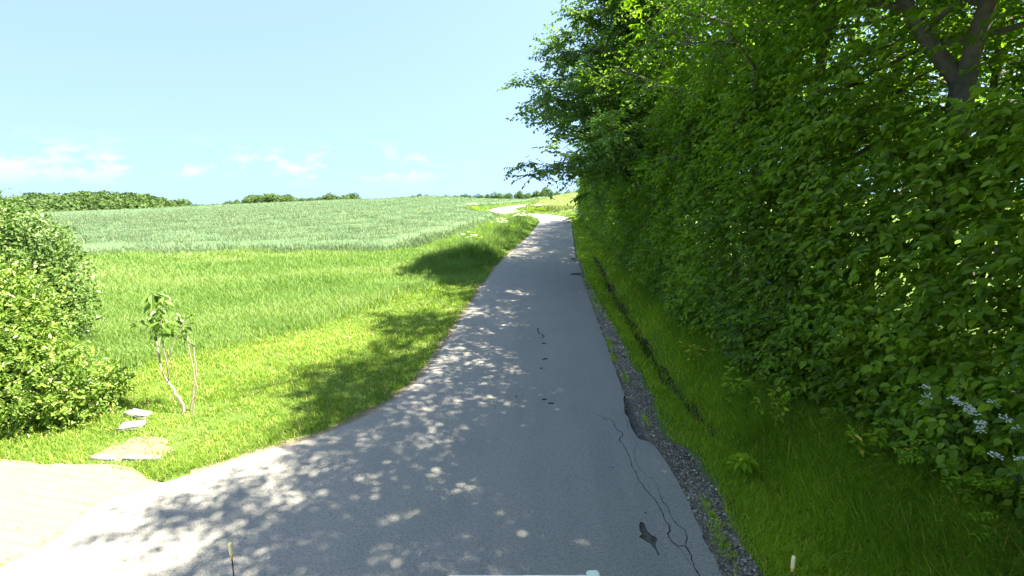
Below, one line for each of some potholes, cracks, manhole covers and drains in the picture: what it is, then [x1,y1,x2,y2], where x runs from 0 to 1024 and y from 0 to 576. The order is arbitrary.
crack [597,417,700,576]
pothole [639,522,659,555]
